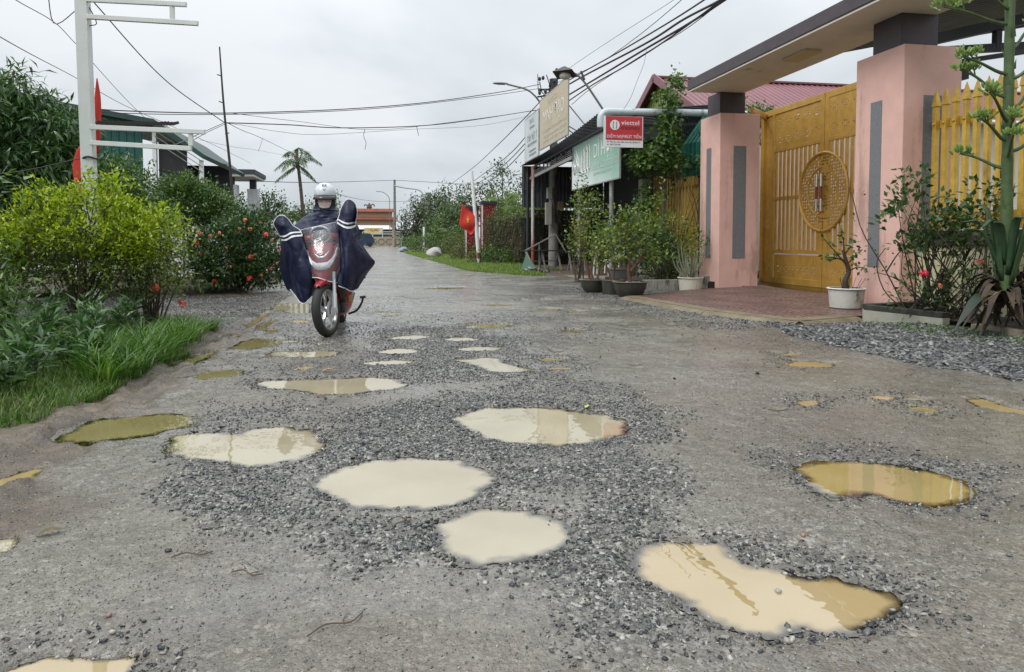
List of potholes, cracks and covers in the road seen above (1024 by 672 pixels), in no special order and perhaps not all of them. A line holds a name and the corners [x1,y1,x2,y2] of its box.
pothole [624,535,914,644]
pothole [182,368,248,380]
pothole [781,360,838,368]
pothole [449,356,533,372]
pothole [0,652,145,672]
pothole [451,405,634,448]
pothole [228,337,301,349]
pothole [0,535,20,552]
pothole [791,458,980,507]
pothole [0,465,49,486]
pothole [306,454,503,511]
pothole [50,411,201,445]
